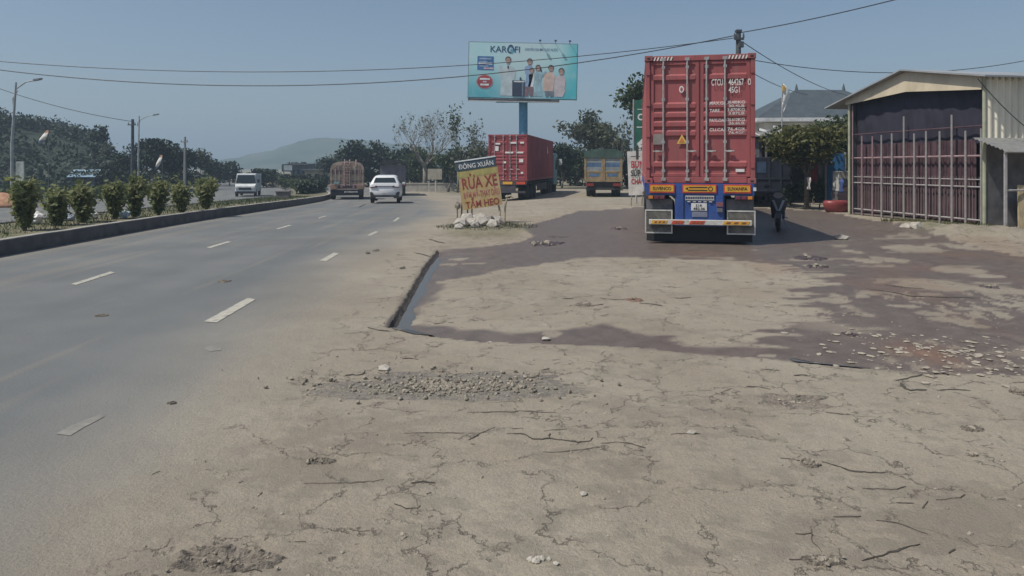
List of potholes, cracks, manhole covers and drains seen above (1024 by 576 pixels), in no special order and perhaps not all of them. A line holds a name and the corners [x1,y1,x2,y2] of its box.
pothole [791,253,828,261]
crack [822,461,965,561]
crack [468,410,646,452]
crack [394,481,435,509]
pothole [221,365,621,413]
pothole [751,393,830,410]
pothole [165,544,288,574]
crack [894,374,983,391]
crack [789,532,821,560]
